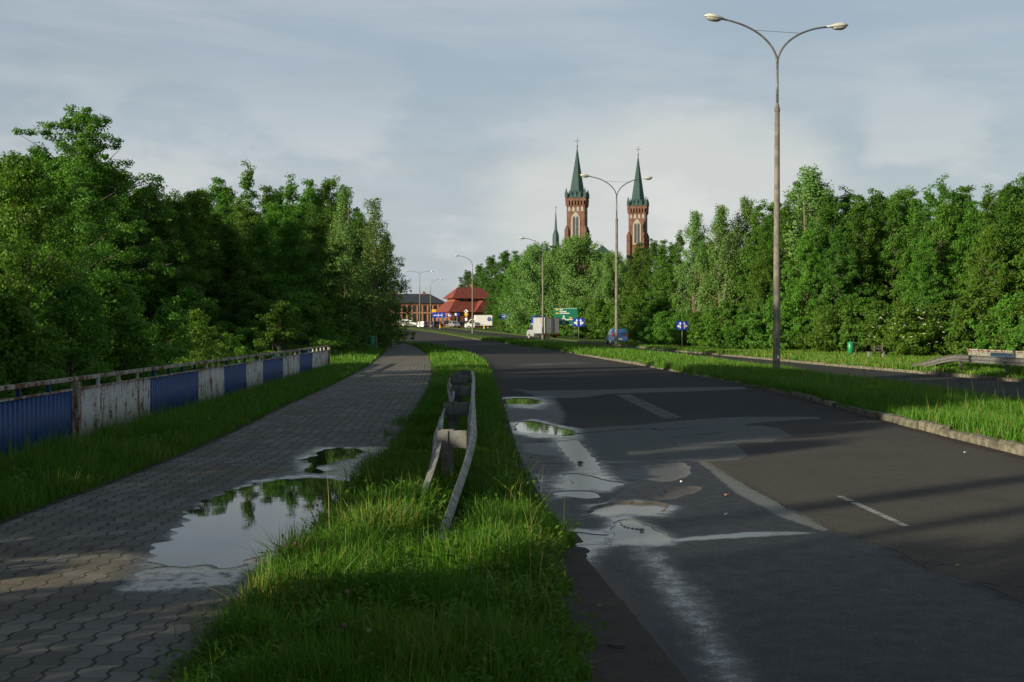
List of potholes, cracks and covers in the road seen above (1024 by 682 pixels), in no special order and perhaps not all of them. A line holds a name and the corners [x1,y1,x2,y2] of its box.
pothole [514,421,576,436]
pothole [583,501,671,515]
